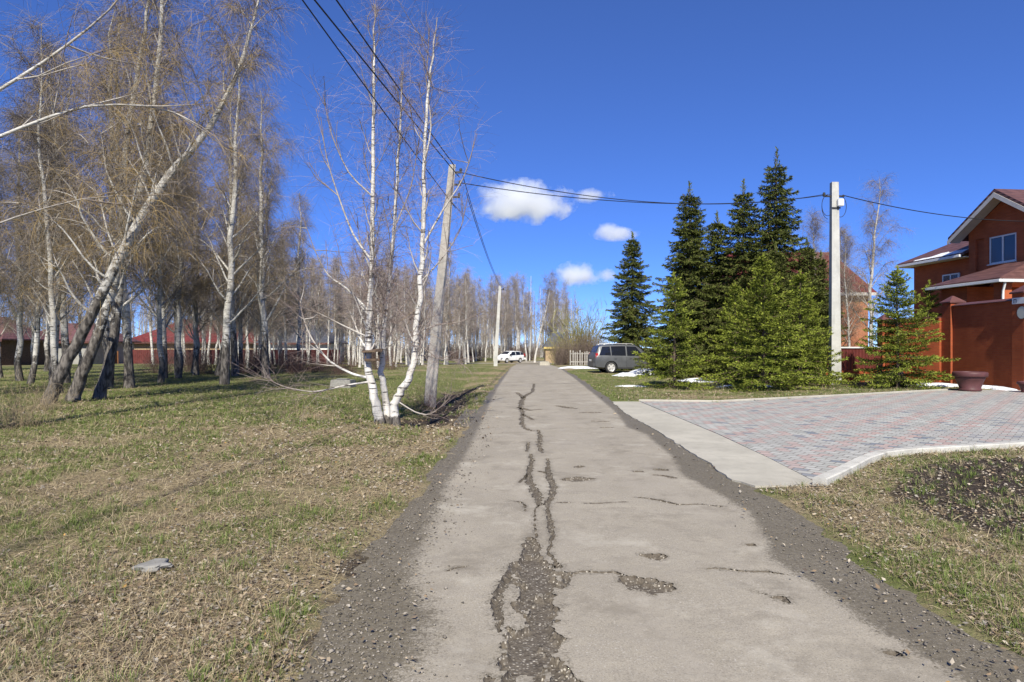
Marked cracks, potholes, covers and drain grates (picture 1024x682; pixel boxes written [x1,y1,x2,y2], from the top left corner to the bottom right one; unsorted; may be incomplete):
pothole [617,575,676,595]
pothole [639,553,668,561]
crack [707,567,788,575]
crack [589,497,723,507]
crack [515,384,625,576]
